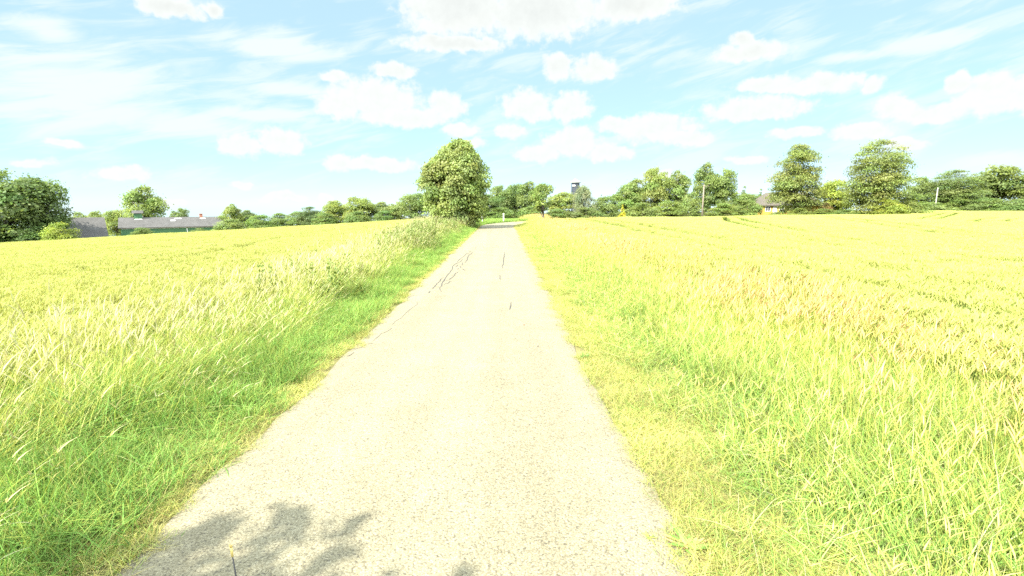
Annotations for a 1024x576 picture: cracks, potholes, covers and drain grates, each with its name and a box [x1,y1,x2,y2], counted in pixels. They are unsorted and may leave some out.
crack [345,247,476,357]
